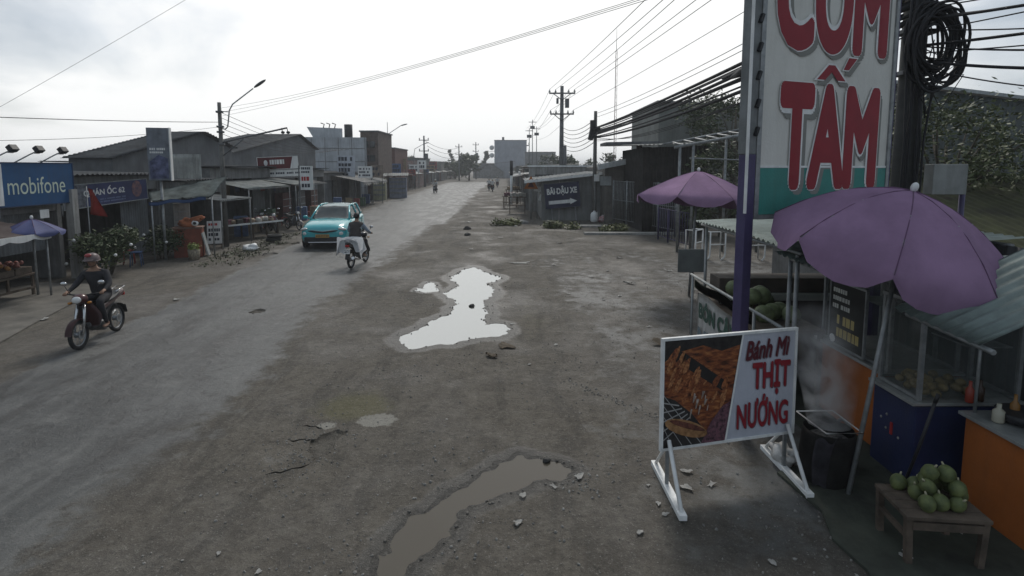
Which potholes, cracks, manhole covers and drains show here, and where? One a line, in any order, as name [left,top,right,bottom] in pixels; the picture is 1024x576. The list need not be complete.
pothole [369,451,579,576]
pothole [399,267,513,350]
